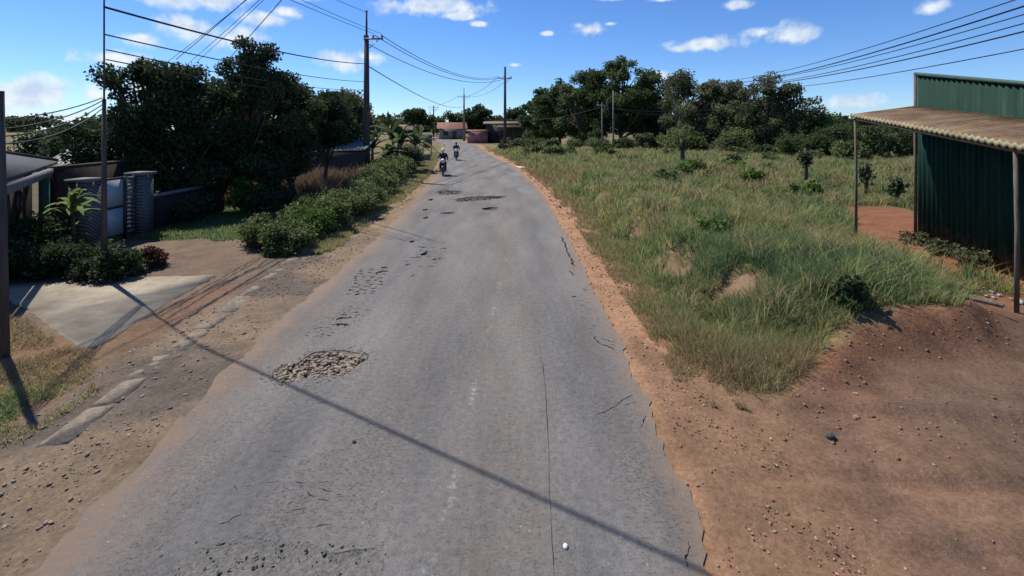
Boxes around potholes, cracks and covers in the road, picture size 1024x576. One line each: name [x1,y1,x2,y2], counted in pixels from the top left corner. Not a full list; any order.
pothole [260,346,378,390]
crack [538,339,555,576]
crack [560,236,614,350]
